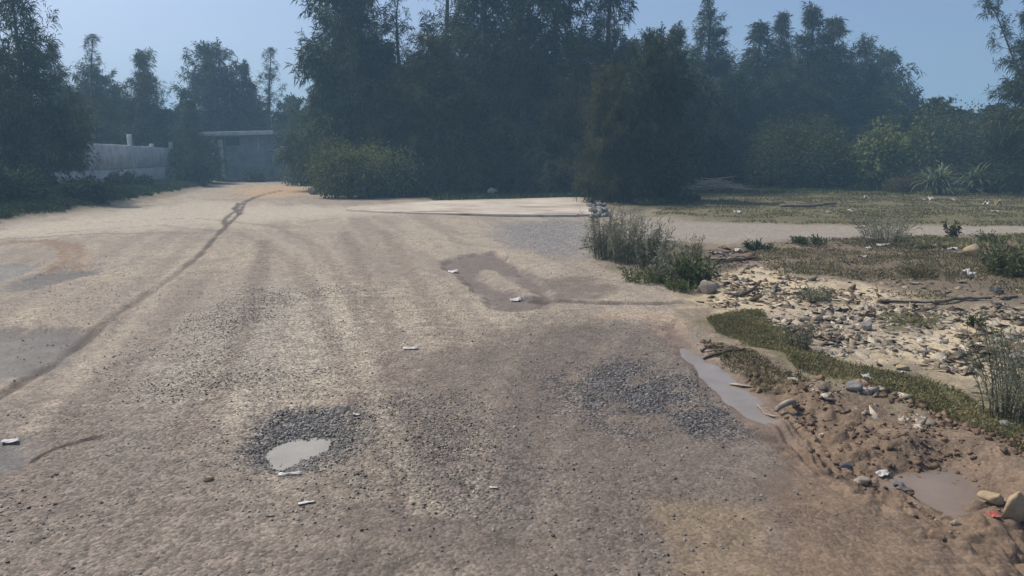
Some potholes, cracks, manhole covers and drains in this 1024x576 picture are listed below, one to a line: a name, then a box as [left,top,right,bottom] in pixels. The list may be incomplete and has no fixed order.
crack [0,190,285,413]
crack [25,434,110,466]
pothole [243,407,374,476]
pothole [657,322,804,451]
